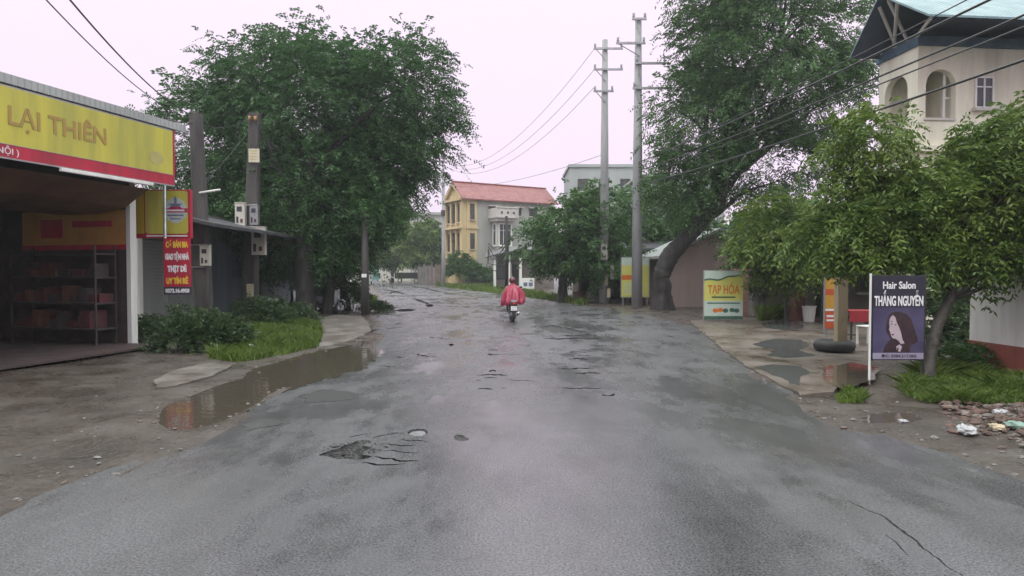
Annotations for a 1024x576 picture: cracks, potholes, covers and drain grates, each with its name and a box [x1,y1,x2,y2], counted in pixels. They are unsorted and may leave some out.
crack [851,502,963,576]
pothole [319,440,388,460]
